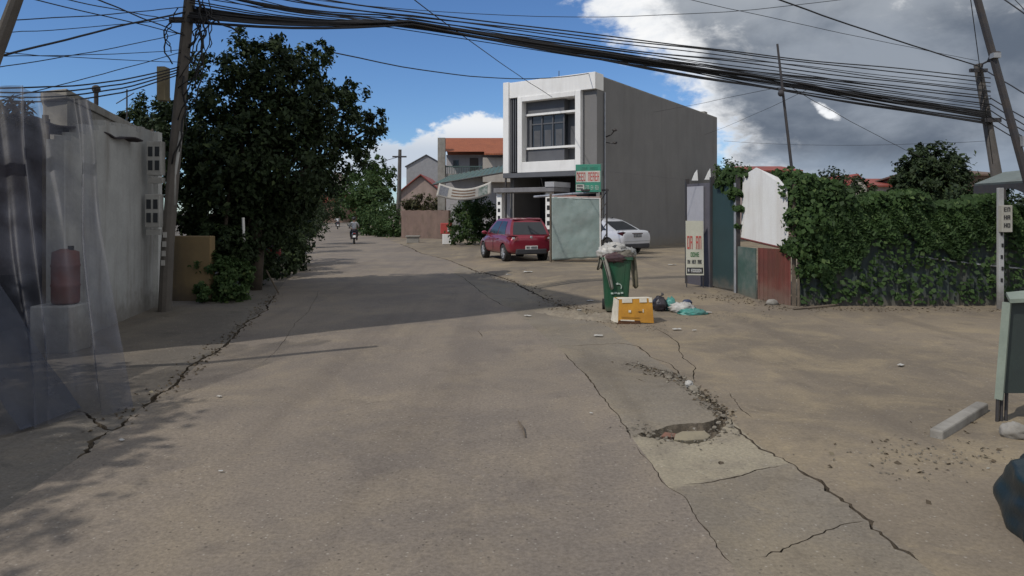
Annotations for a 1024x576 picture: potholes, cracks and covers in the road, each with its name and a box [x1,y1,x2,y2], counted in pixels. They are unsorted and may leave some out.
pothole [638,418,727,444]
crack [77,294,276,459]
crack [564,330,919,561]
